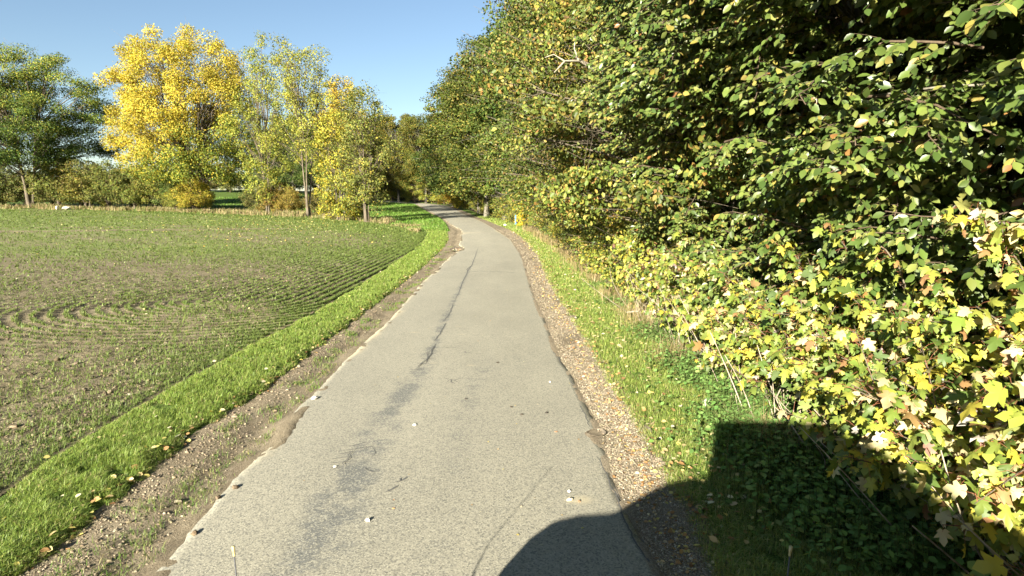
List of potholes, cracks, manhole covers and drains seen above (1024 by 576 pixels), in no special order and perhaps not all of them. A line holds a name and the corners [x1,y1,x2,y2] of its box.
crack [412,249,514,370]
